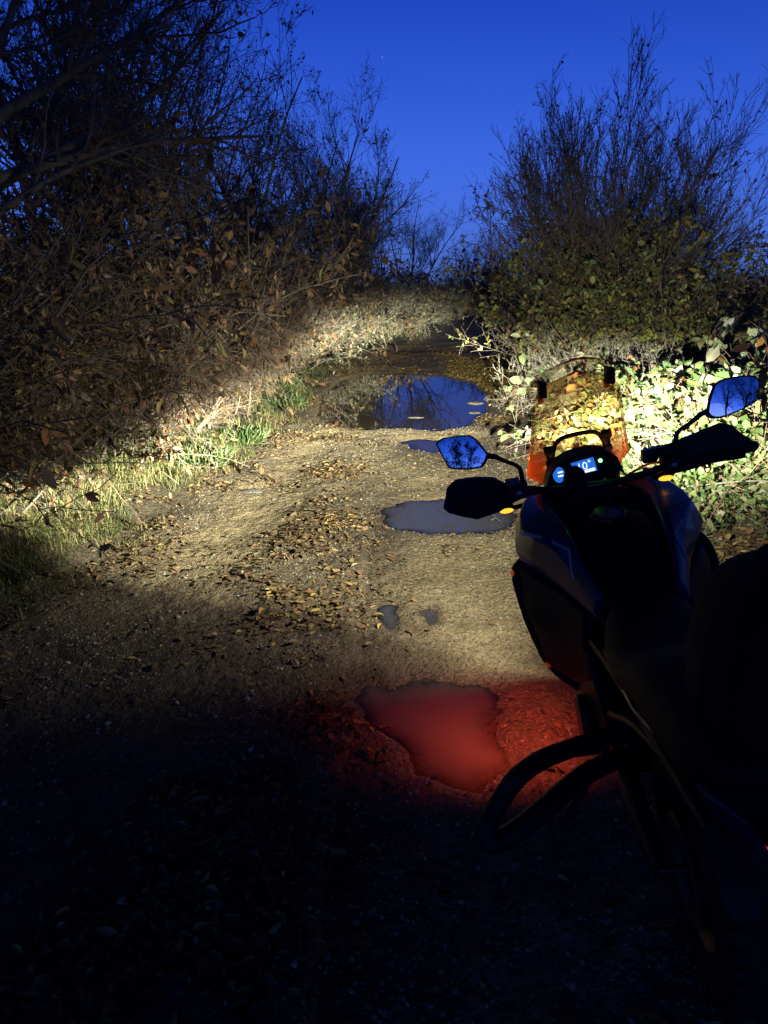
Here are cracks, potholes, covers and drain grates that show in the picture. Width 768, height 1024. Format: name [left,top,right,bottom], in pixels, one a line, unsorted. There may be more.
pothole [366,598,410,633]
pothole [410,601,449,628]
pothole [313,373,490,432]
pothole [338,666,521,801]
pothole [375,496,520,536]
pothole [395,437,440,454]
